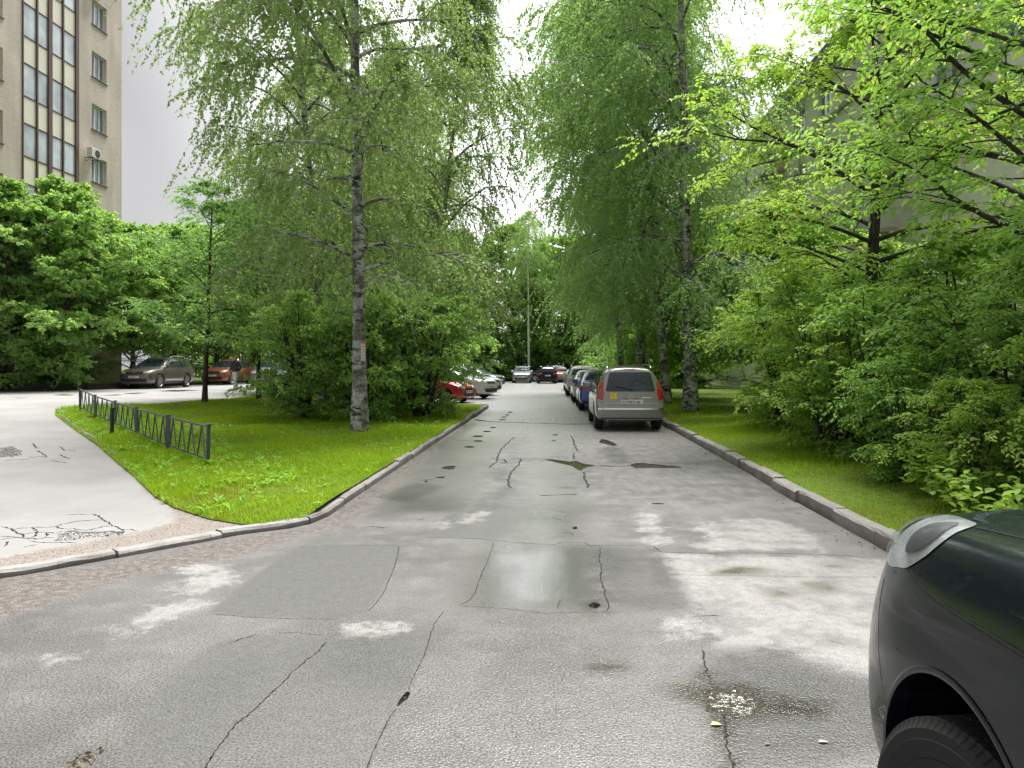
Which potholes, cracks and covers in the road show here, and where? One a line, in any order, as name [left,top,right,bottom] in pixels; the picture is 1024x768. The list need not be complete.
crack [702,651,736,768]
pothole [704,687,760,717]
crack [1,514,138,547]
crack [18,444,72,463]
crack [540,436,612,496]
crack [205,545,399,768]
crack [478,420,554,488]
pothole [66,746,104,768]
pothole [544,459,596,471]
